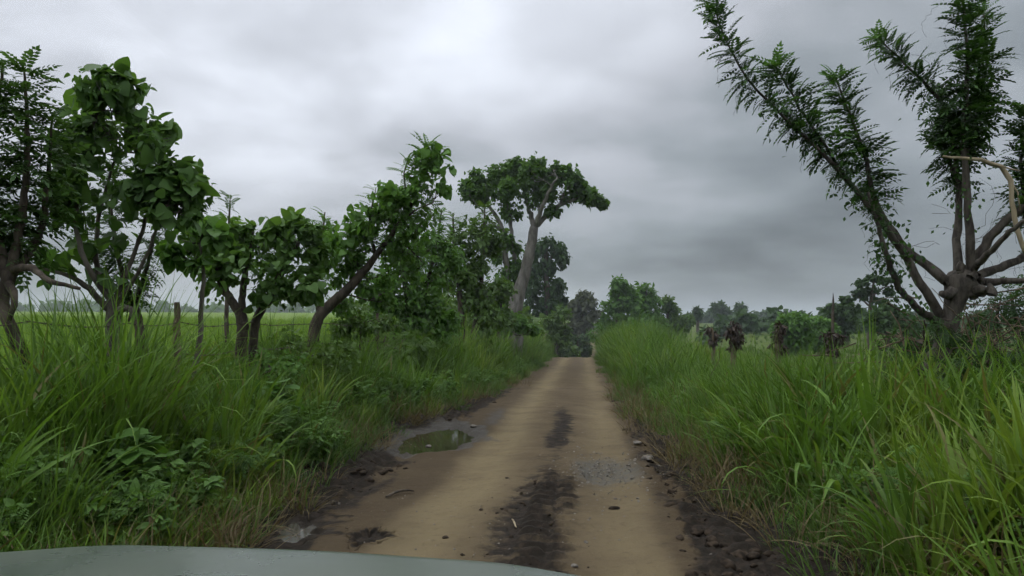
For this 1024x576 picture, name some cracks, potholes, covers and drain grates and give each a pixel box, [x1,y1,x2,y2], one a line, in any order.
pothole [359,417,498,462]
